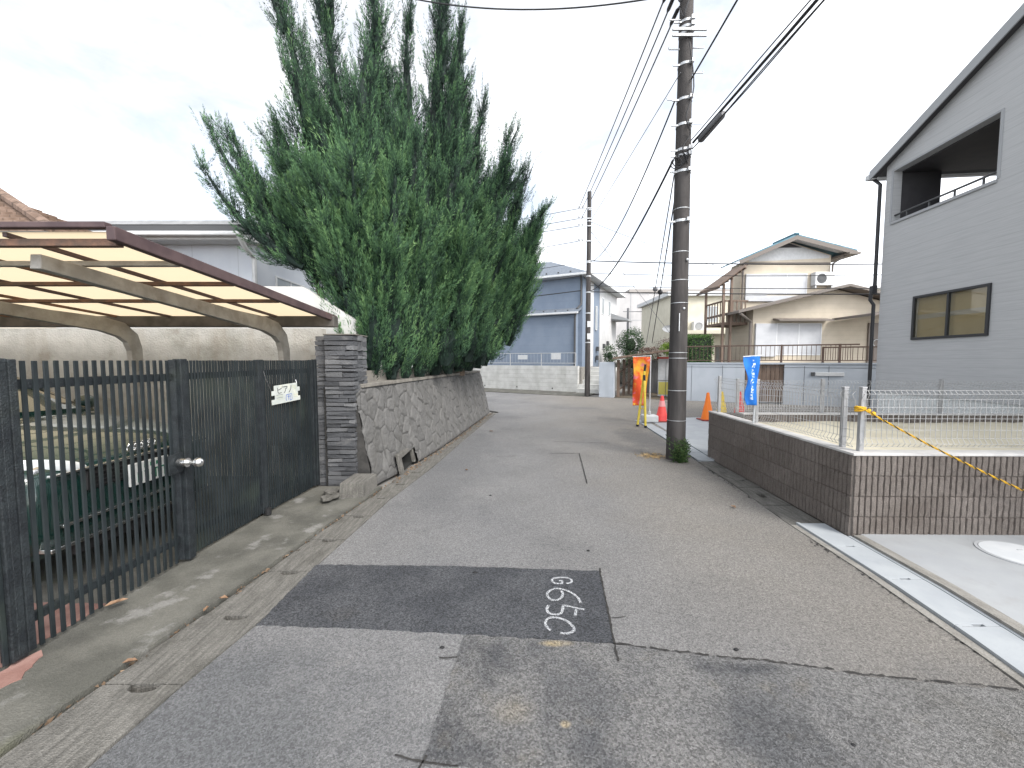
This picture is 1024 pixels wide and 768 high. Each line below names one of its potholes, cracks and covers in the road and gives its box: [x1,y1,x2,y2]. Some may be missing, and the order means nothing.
manhole cover [974,540,1024,566]
